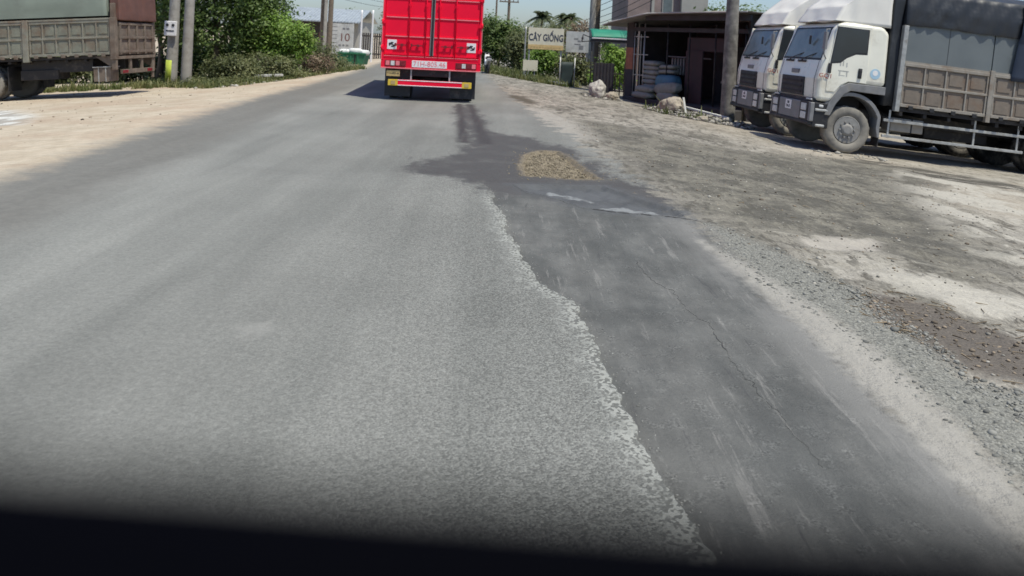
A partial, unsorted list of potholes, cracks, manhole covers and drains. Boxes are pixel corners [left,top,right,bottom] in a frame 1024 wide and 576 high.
pothole [505,148,617,183]
crack [636,263,822,467]
